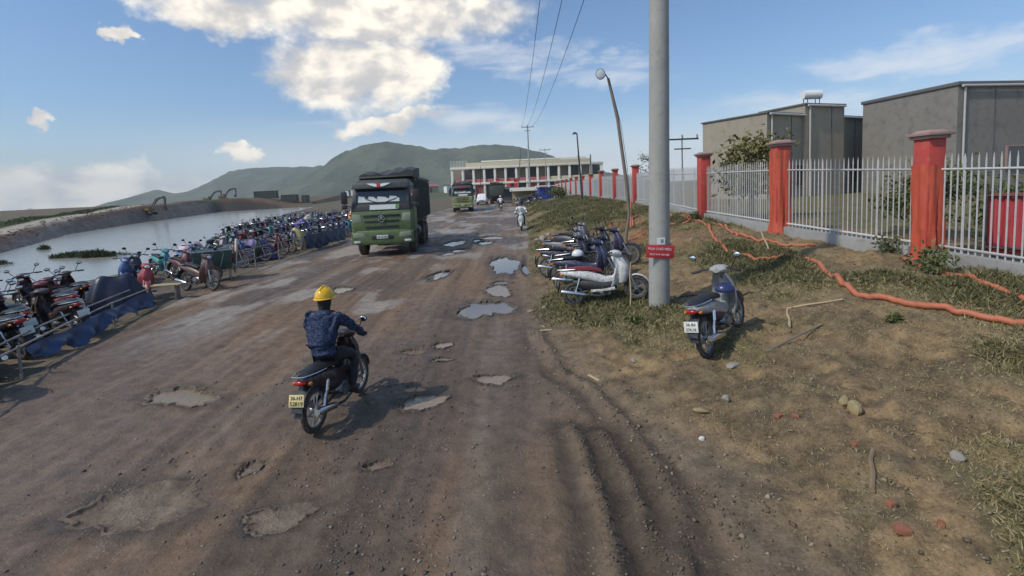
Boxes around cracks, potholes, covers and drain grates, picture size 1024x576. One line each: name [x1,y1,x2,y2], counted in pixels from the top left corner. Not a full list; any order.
pothole [332,286,356,295]
pothole [141,384,223,408]
pothole [452,300,520,320]
pothole [482,284,512,298]
pothole [471,374,517,386]
pothole [237,458,265,480]
pothole [398,393,452,413]
pothole [359,458,395,471]
pothole [432,341,454,349]
pothole [487,256,523,276]
pothole [242,502,321,538]
pothole [57,478,211,536]
